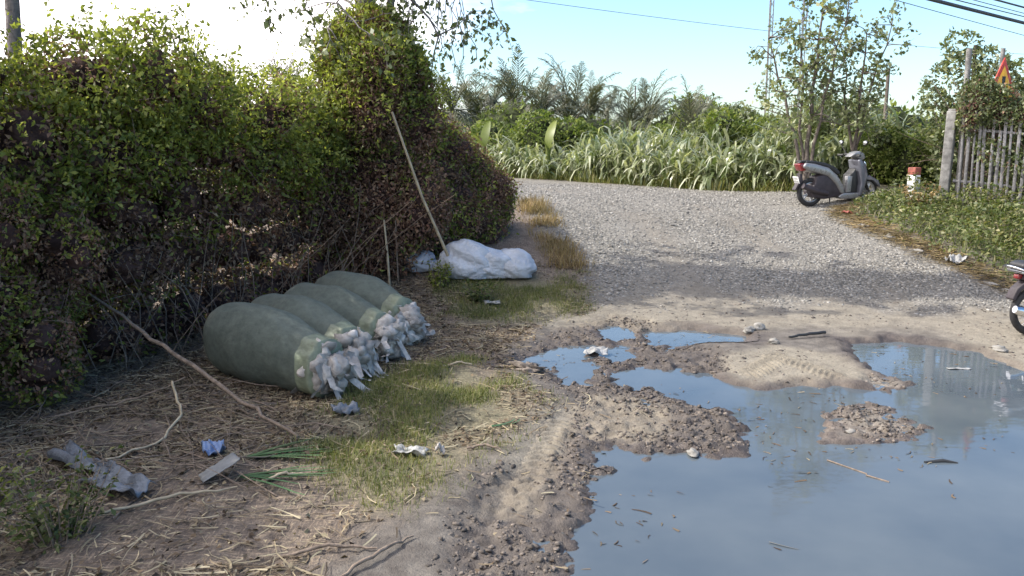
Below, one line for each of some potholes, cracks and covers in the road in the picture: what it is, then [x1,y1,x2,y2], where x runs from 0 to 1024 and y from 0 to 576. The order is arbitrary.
pothole [533,334,1024,576]
